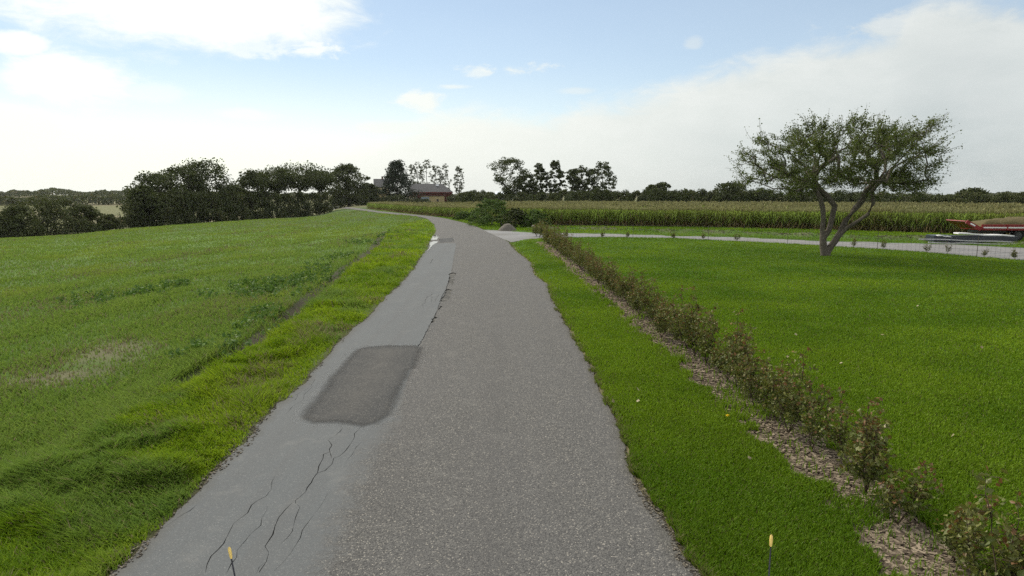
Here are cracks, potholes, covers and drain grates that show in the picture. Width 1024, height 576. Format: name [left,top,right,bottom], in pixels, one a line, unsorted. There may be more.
crack [205,426,362,574]
